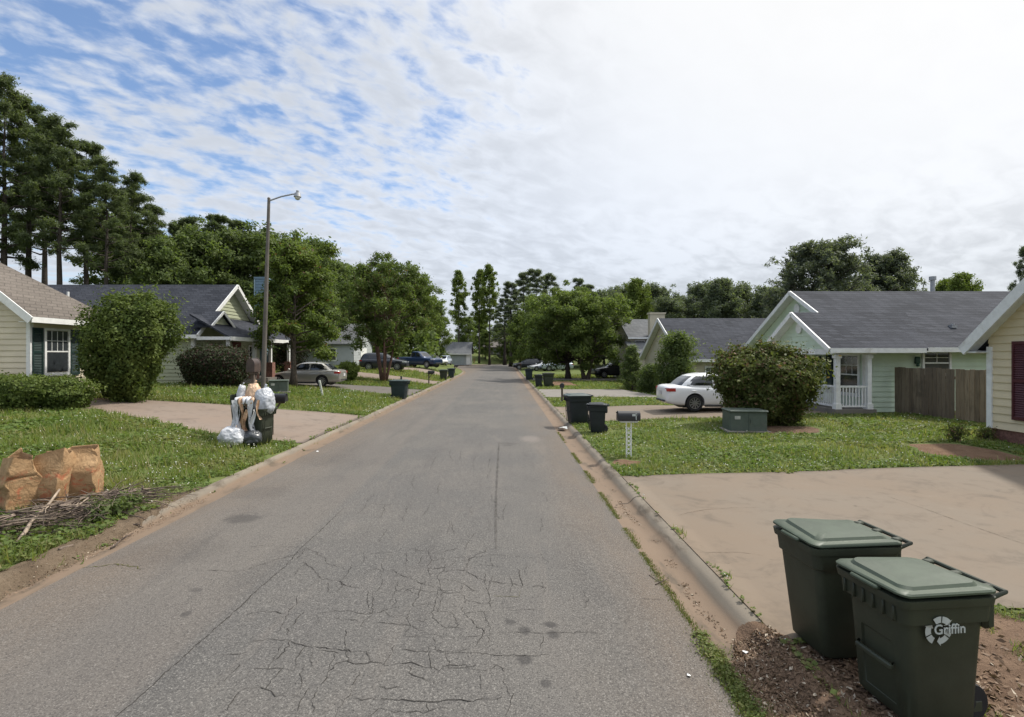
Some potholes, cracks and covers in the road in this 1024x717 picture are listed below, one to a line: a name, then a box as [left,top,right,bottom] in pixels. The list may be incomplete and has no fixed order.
crack [115,454,598,717]
